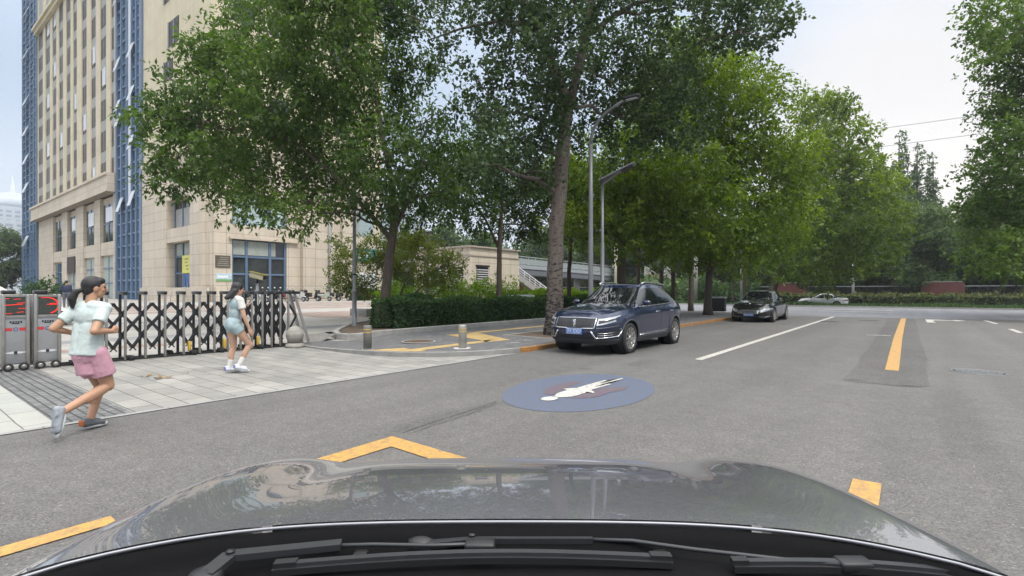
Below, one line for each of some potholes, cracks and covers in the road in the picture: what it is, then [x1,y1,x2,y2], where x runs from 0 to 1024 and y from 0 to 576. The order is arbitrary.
manhole cover [949,368,1009,376]
